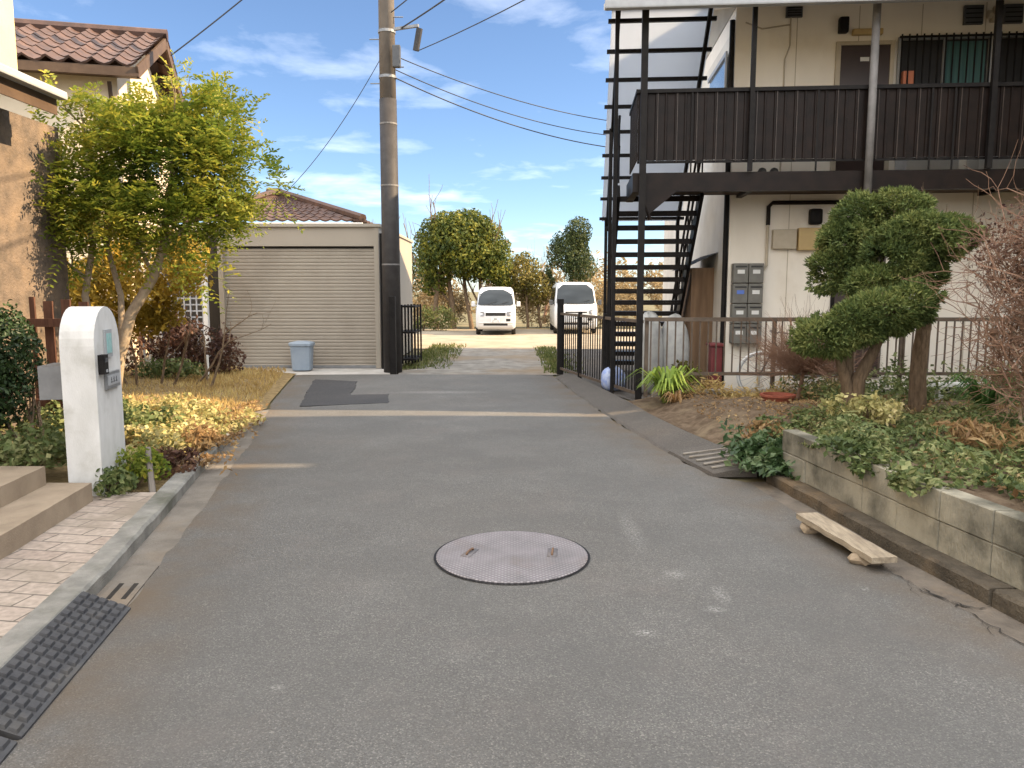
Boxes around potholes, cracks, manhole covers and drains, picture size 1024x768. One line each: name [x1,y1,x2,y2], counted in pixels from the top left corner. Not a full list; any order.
manhole cover [434,531,590,585]
crack [881,565,1024,644]
